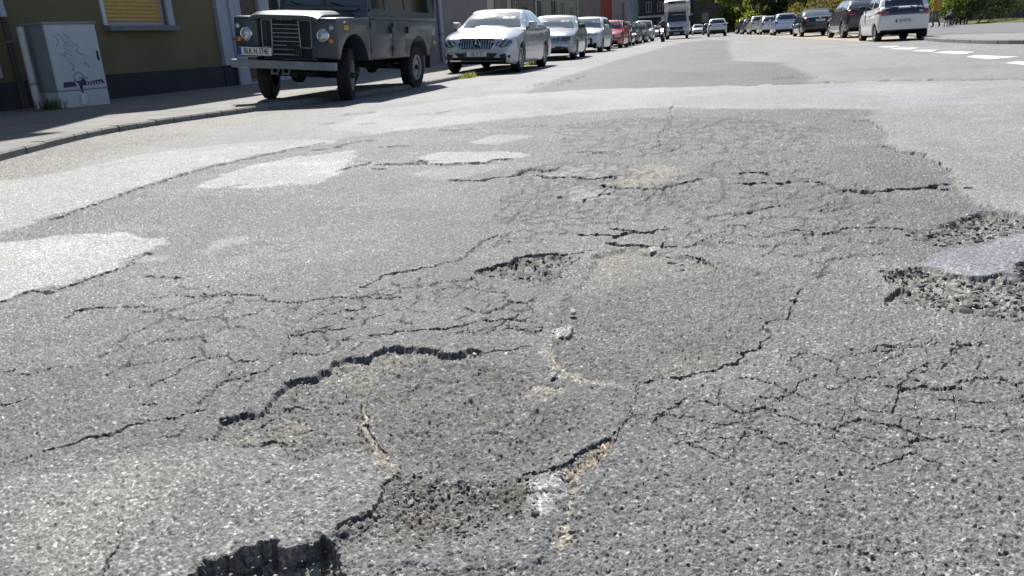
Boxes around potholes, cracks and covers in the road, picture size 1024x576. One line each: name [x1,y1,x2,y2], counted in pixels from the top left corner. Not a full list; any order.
pothole [187,534,348,576]
pothole [323,471,540,554]
pothole [878,261,1024,322]
crack [101,515,127,576]
pothole [904,208,1024,249]
crack [0,105,1024,477]
pothole [475,255,575,287]
